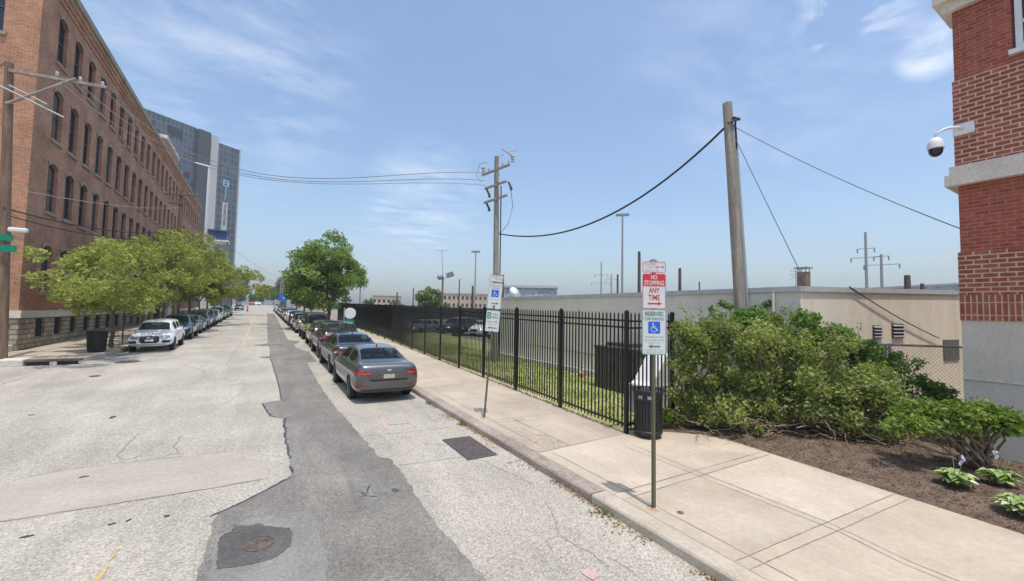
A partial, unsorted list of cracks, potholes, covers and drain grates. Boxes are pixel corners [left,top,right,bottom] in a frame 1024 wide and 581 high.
crack [28,433,181,477]
manhole cover [243,535,274,552]
crack [545,502,645,578]
